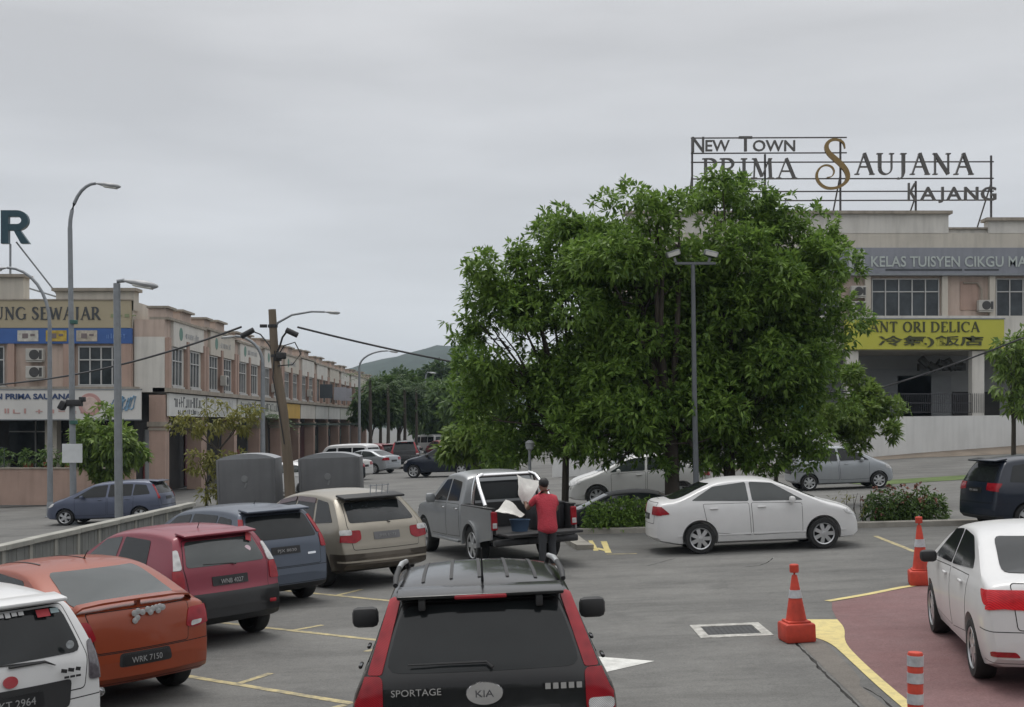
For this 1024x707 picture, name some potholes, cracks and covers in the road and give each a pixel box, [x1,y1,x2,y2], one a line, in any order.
crack [795,643,892,707]
